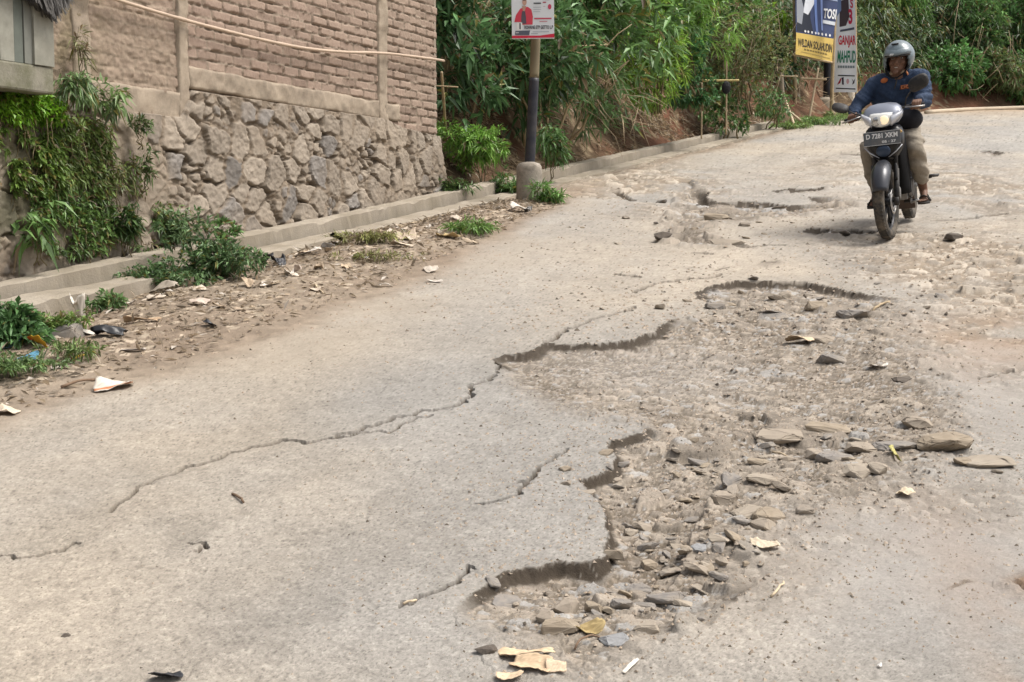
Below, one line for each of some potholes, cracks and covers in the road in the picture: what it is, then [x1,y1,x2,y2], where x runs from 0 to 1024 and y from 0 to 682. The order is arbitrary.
pothole [802,227,879,240]
crack [0,541,82,560]
crack [107,362,569,513]
pothole [453,280,987,682]
crack [398,564,477,609]
pothole [648,180,866,250]
